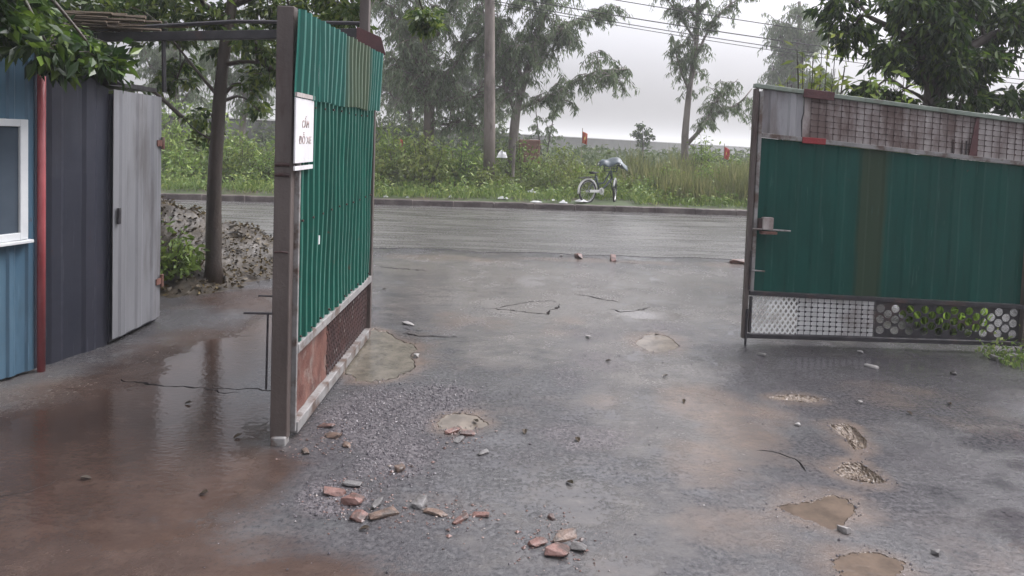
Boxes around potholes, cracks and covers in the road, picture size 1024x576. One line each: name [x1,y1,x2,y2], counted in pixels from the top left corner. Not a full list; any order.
pothole [832,552,906,576]
crack [113,378,271,394]
crack [401,327,457,337]
crack [756,450,806,471]
crack [486,294,650,315]
pothole [769,394,821,403]
pothole [830,423,867,450]
pothole [834,462,886,484]
pothole [778,494,856,530]
